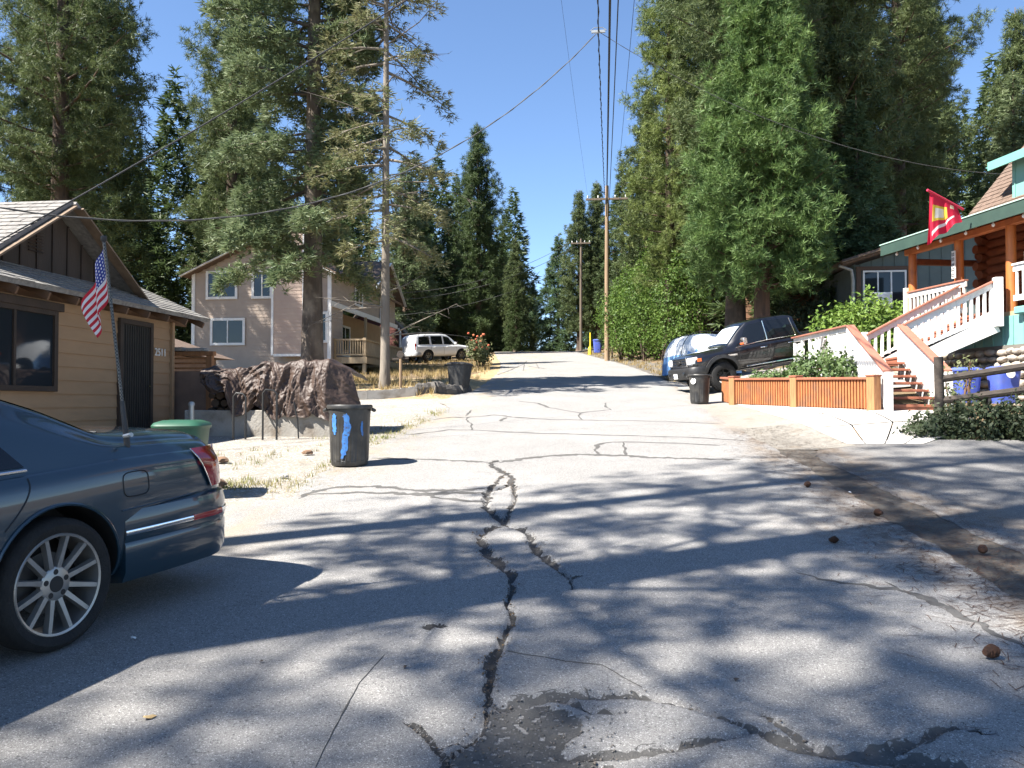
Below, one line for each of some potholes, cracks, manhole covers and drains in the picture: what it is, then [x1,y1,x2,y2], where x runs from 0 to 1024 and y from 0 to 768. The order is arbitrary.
pothole [451,706,613,768]
crack [300,410,996,768]
